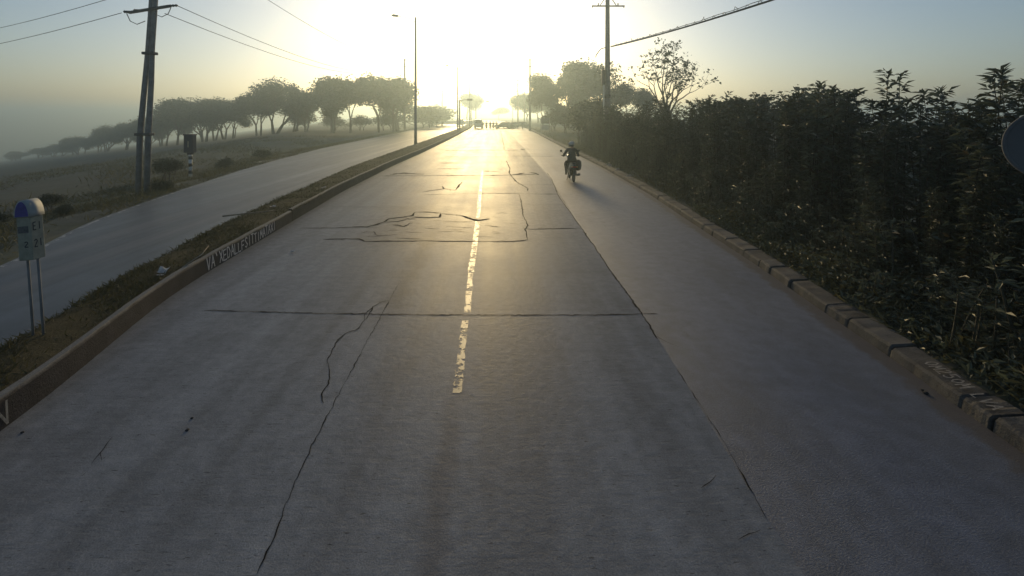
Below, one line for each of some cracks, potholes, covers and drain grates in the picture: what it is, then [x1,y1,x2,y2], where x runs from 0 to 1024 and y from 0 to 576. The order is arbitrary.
crack [678,371,766,539]
crack [329,131,671,344]
crack [257,289,396,573]
